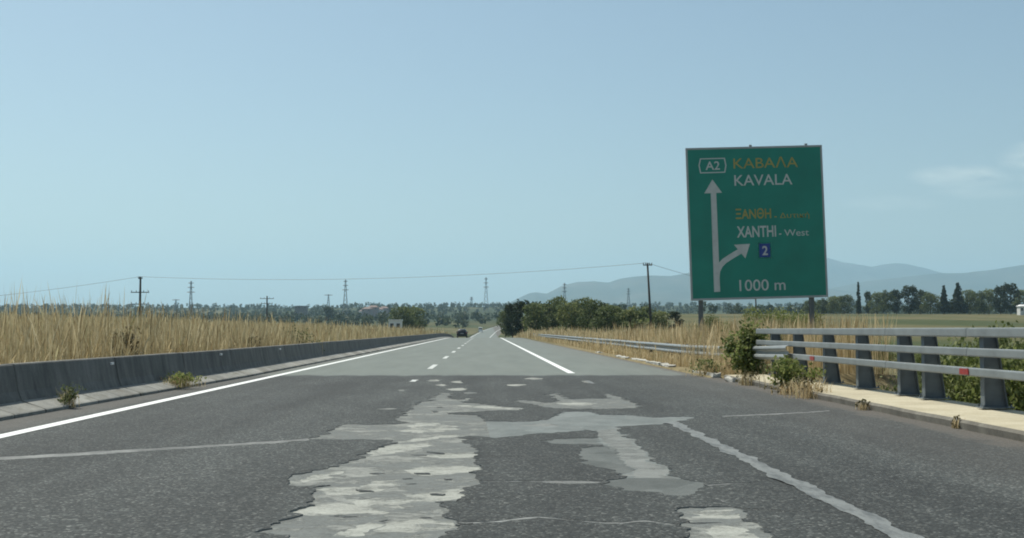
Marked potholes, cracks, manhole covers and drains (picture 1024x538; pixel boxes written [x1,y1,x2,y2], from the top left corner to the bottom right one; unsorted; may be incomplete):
crack [459,517,673,525]
